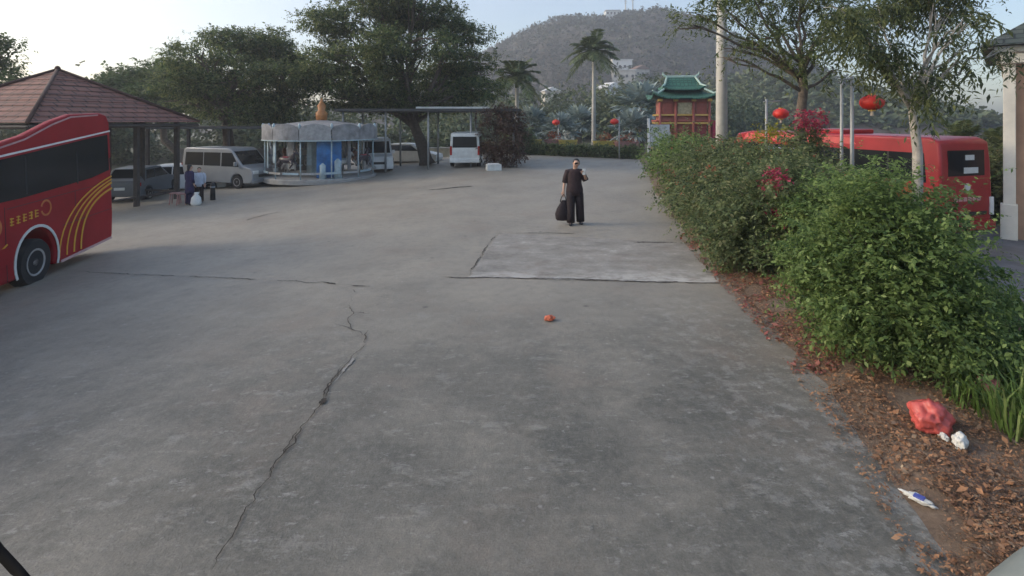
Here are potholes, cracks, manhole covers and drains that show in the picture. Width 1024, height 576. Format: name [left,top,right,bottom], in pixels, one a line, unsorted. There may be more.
crack [85,271,368,569]
